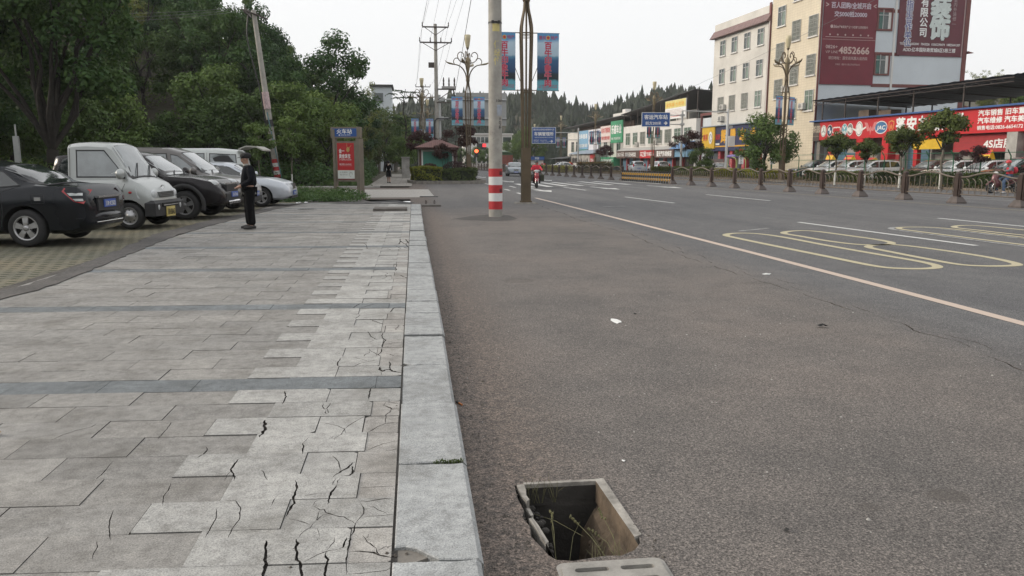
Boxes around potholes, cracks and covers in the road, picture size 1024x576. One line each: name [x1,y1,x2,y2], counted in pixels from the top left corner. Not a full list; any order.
crack [259,391,287,437]
crack [205,500,241,537]
crack [271,457,393,576]
crack [322,298,403,440]
crack [261,541,270,576]
